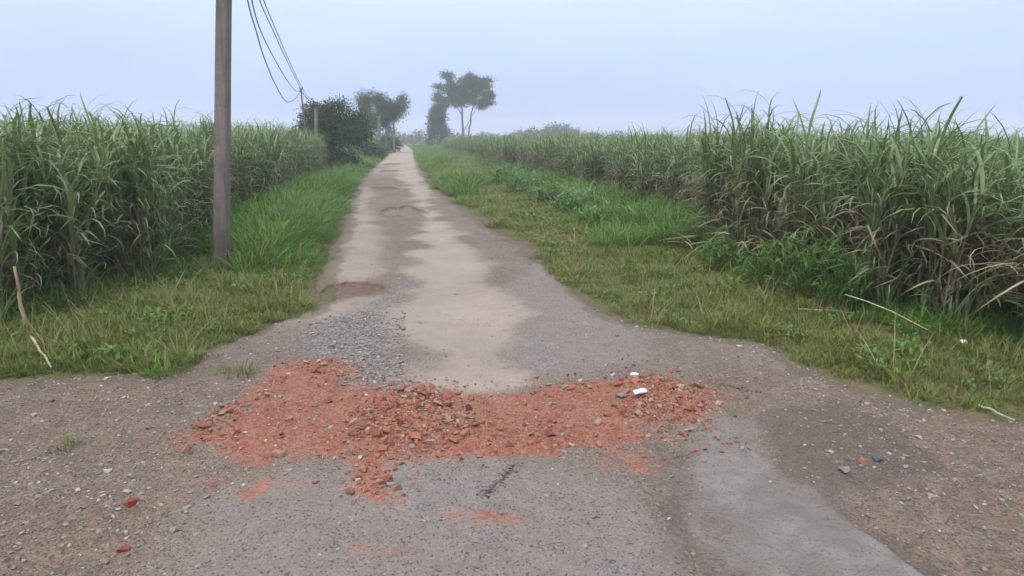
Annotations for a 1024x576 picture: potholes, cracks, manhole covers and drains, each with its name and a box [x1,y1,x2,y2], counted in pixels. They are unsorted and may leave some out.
pothole [376,204,428,219]
pothole [315,279,392,306]
crack [476,461,523,501]
